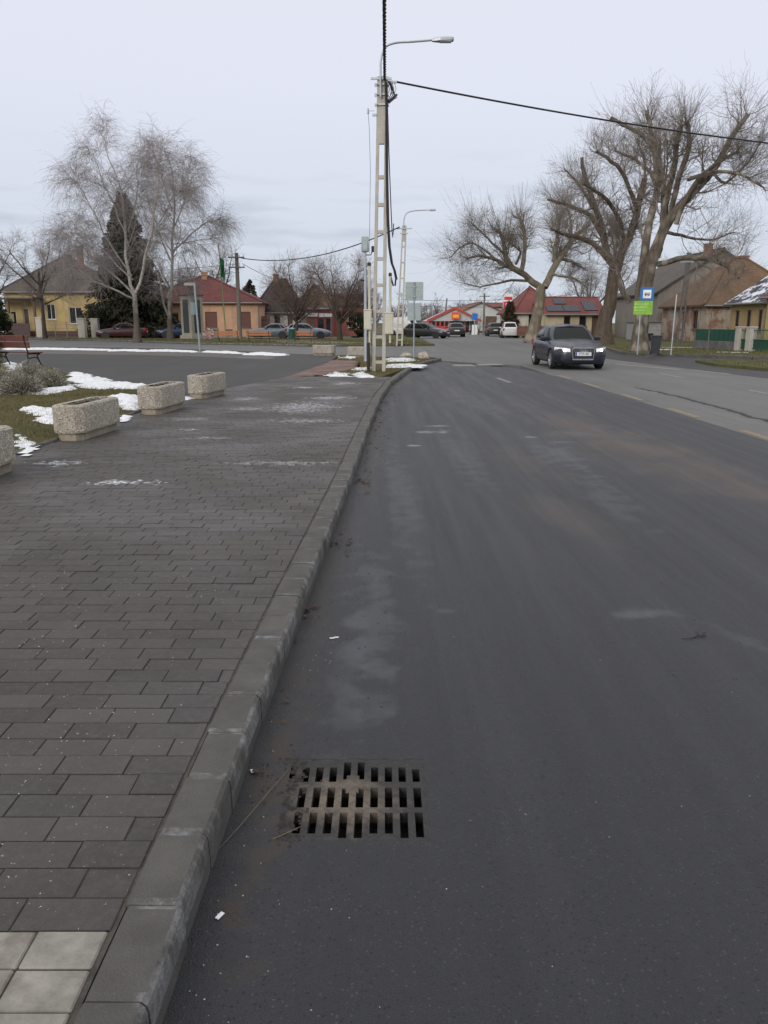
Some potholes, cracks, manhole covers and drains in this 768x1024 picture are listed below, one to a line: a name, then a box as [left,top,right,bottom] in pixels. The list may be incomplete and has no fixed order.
drain grate [277,759,431,842]
crack [632,386,768,422]
